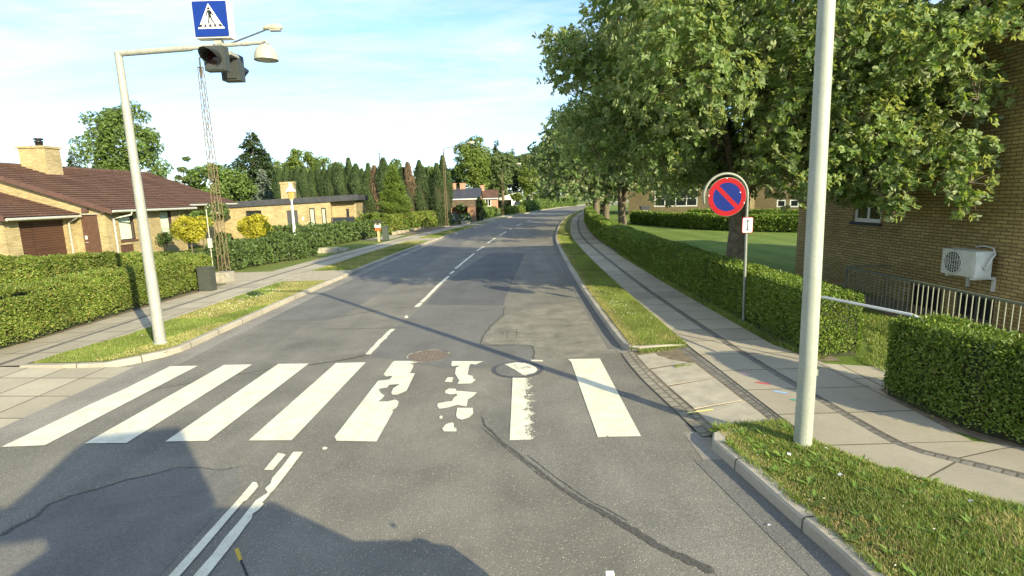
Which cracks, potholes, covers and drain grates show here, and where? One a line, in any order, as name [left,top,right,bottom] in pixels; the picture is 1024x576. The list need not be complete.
manhole cover [492,361,544,378]
crack [482,417,715,574]
crack [0,465,243,536]
manhole cover [406,349,452,363]
